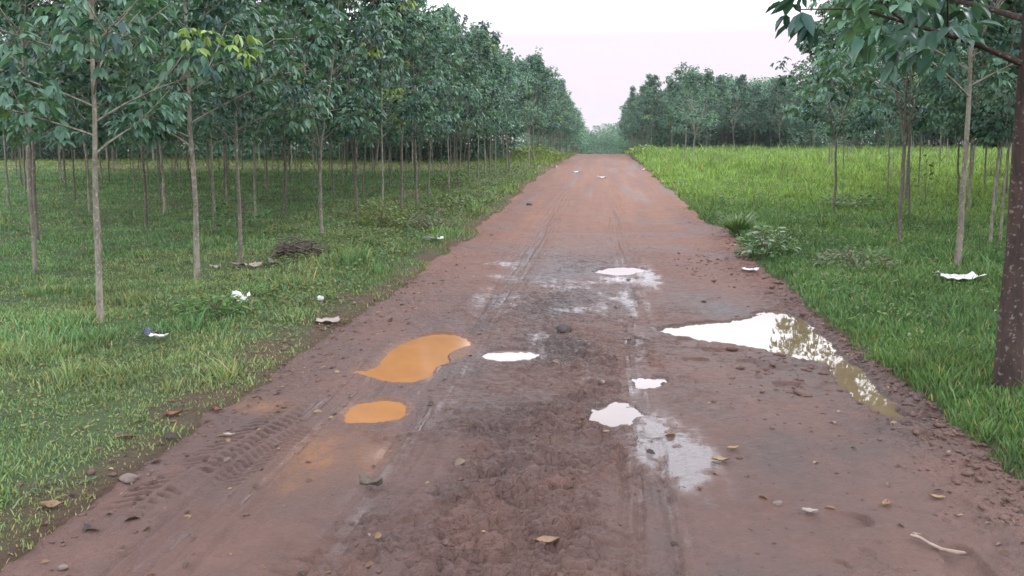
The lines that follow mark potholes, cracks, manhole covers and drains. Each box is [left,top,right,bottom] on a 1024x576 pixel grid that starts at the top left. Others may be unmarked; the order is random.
pothole [350,331,475,383]
pothole [653,309,911,418]
pothole [478,346,544,361]
pothole [585,398,653,427]
pothole [625,374,671,389]
pothole [337,396,412,424]
pothole [591,266,649,276]
